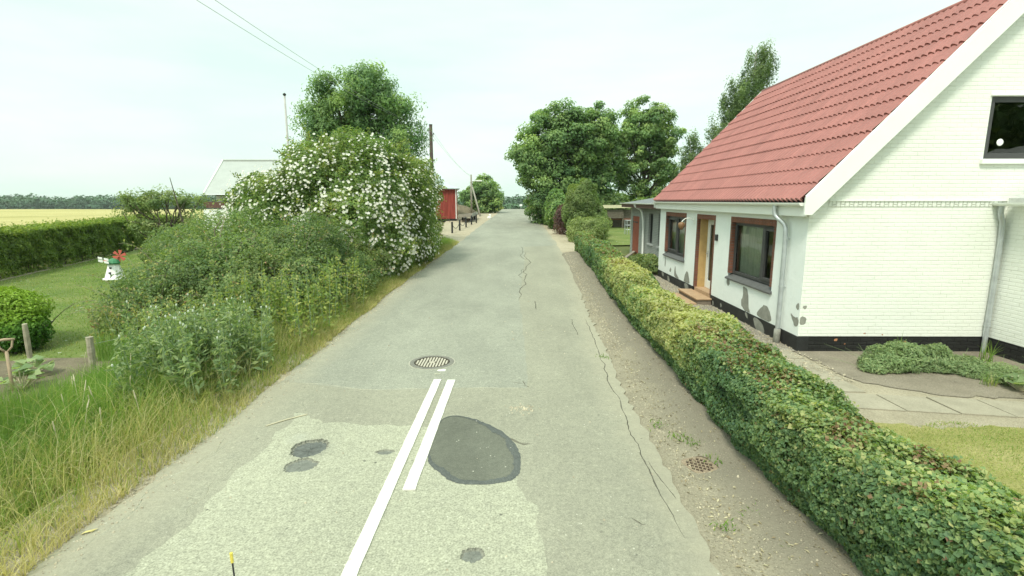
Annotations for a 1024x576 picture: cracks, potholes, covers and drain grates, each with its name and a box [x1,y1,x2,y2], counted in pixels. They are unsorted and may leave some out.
drain grate [681,456,718,473]
manhole cover [409,355,455,370]
crack [572,321,684,536]
